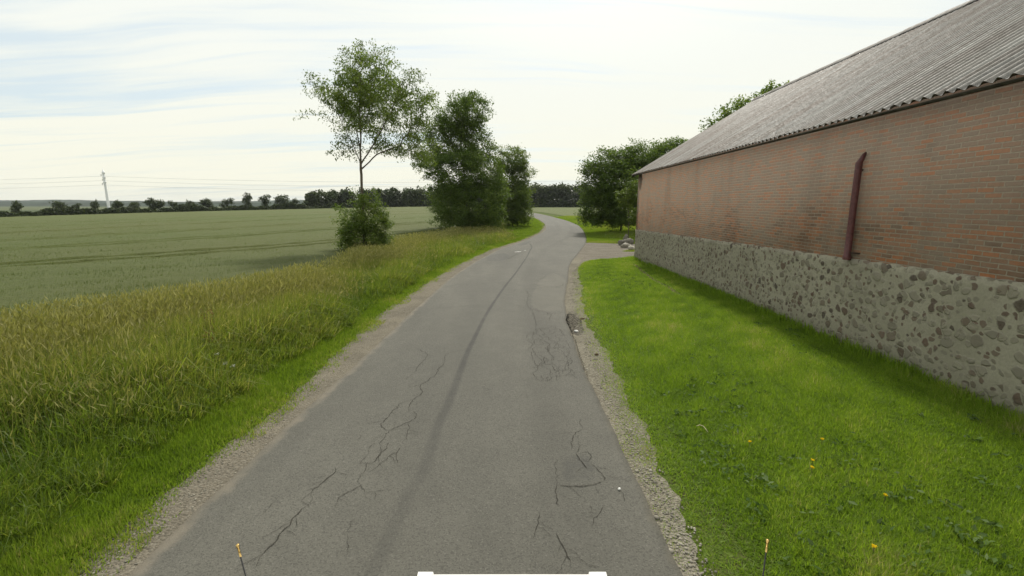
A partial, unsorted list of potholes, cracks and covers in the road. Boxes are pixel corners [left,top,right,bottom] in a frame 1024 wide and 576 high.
pothole [566,313,585,335]
crack [236,348,453,567]
crack [524,275,589,381]
crack [533,425,622,574]
